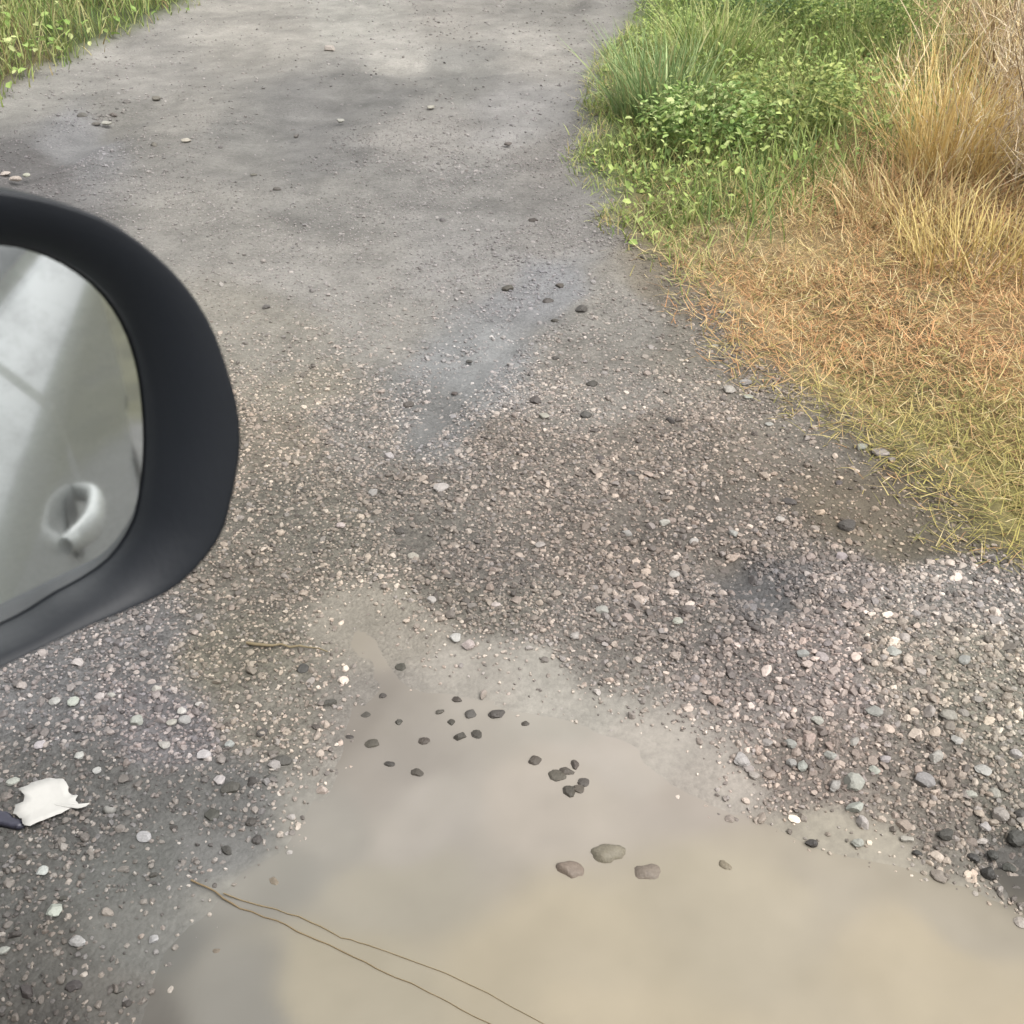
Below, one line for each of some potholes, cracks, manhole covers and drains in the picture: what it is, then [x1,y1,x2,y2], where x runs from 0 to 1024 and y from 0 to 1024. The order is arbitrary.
pothole [315,613,746,815]
